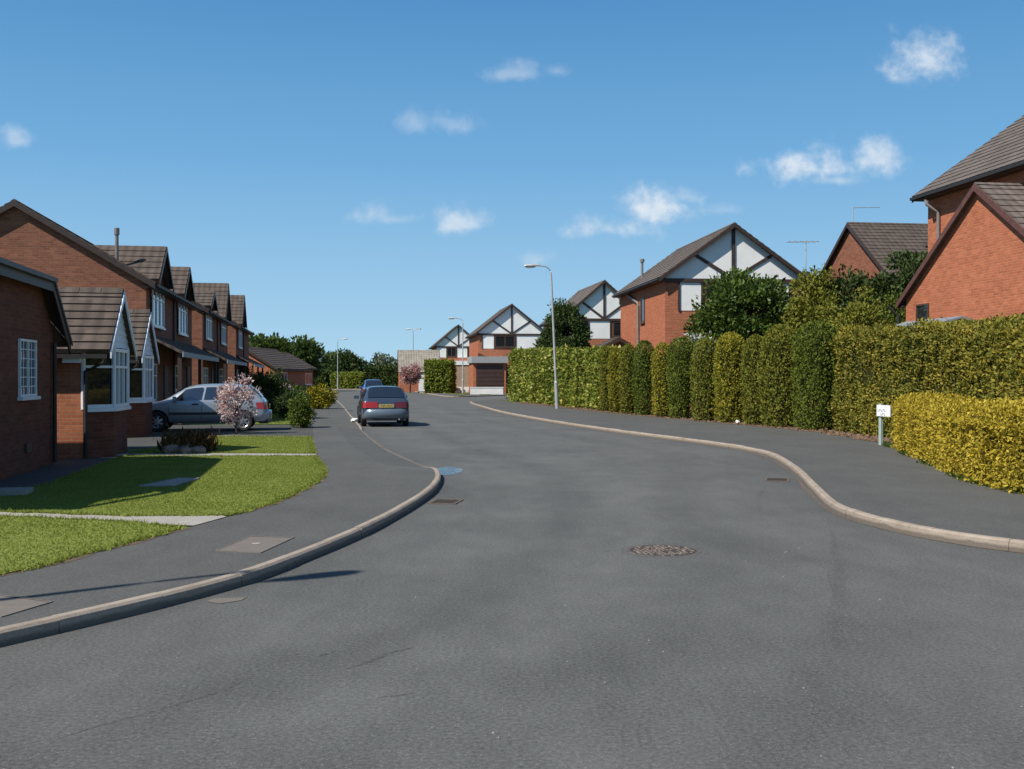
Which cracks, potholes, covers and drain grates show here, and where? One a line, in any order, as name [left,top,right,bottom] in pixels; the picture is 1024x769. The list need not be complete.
utility cover [215,536,295,553]
manhole cover [620,544,708,558]
utility cover [0,595,53,618]
crack [320,647,413,669]
